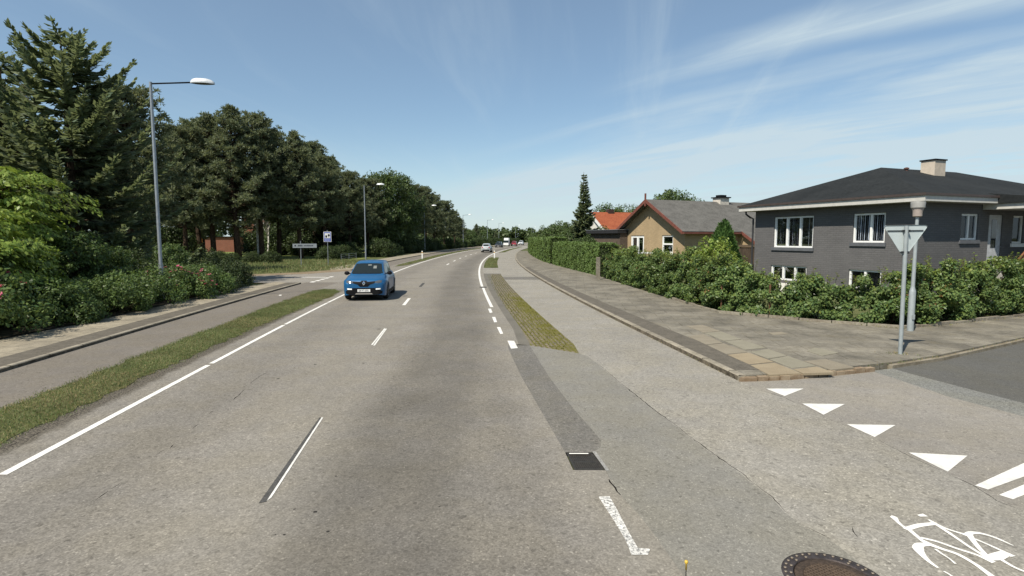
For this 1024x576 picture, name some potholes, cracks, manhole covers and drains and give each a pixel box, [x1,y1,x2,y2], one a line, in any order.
drain grate [567,451,609,470]
manhole cover [781,553,879,576]
